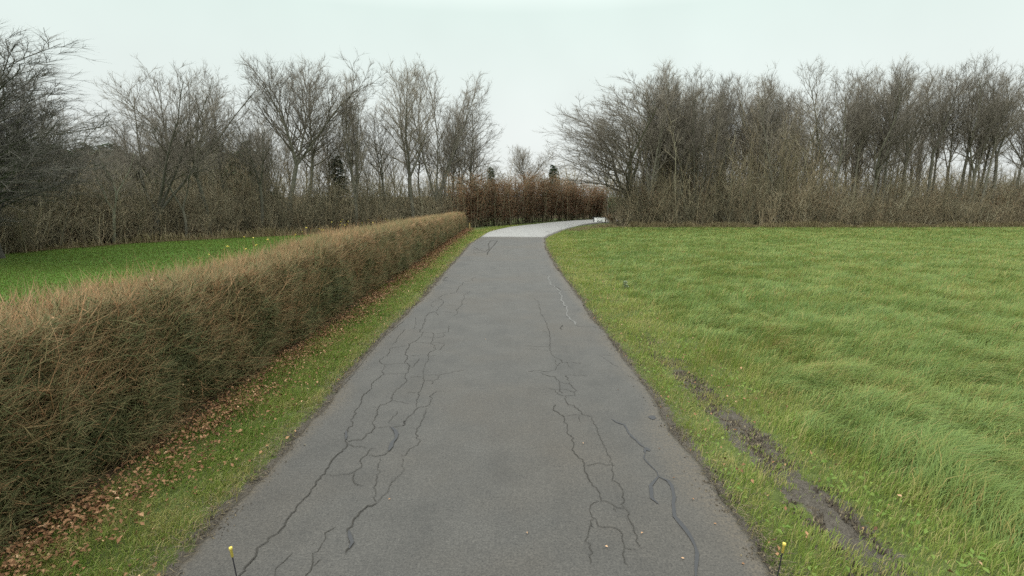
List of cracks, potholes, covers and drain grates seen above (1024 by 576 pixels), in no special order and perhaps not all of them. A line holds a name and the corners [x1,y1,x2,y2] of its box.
crack [527,308,699,576]
crack [238,277,475,576]
